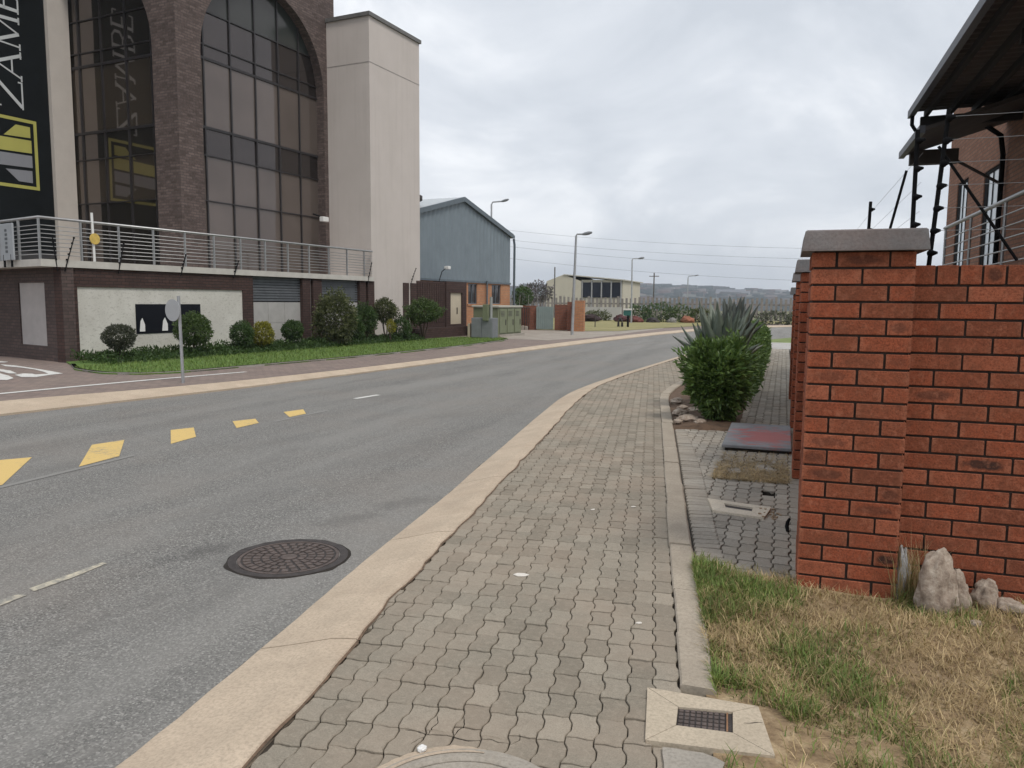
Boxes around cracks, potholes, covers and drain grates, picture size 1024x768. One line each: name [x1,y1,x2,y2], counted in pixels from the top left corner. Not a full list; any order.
manhole cover [223,539,351,579]
manhole cover [378,745,540,768]
